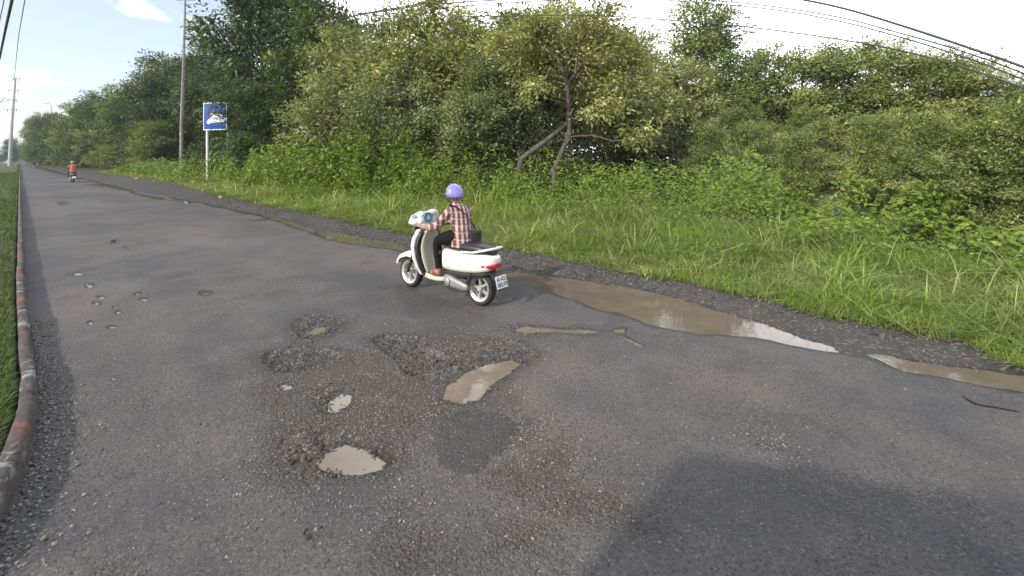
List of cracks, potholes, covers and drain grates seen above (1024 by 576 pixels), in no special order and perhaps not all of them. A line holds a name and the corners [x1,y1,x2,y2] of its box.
pothole [610,326,628,335]
crack [963,396,1021,413]
pothole [303,382,358,417]
pothole [257,346,348,374]
pothole [267,418,406,482]
pothole [431,340,542,408]
pothole [286,313,346,342]
pothole [512,324,605,335]
pothole [616,334,645,346]
pothole [368,332,458,382]
